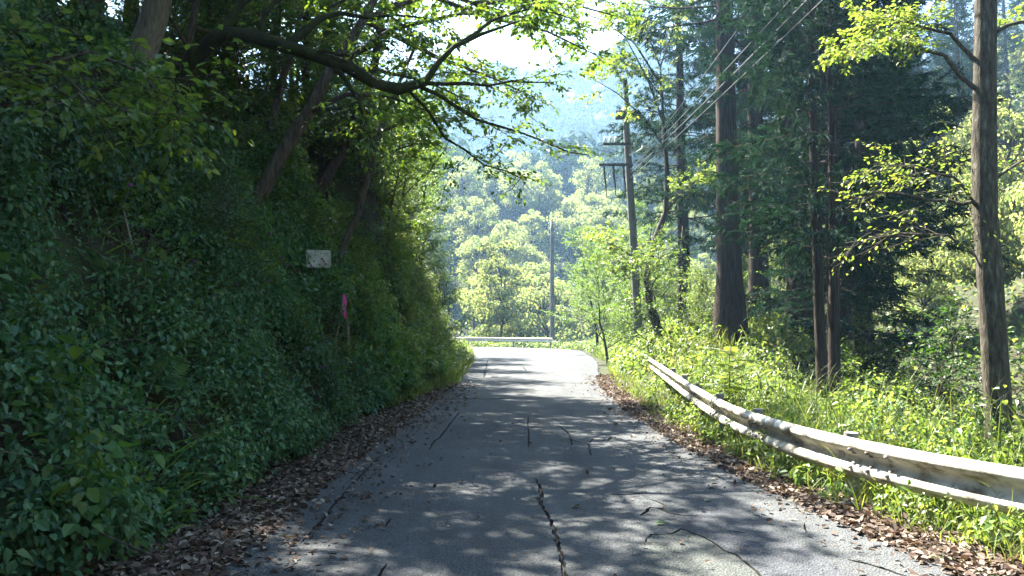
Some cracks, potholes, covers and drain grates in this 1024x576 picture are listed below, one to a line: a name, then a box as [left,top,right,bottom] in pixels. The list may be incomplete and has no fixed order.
crack [300,455,381,544]
crack [607,493,762,576]
crack [429,411,461,450]
crack [535,478,568,576]
crack [553,424,629,456]
